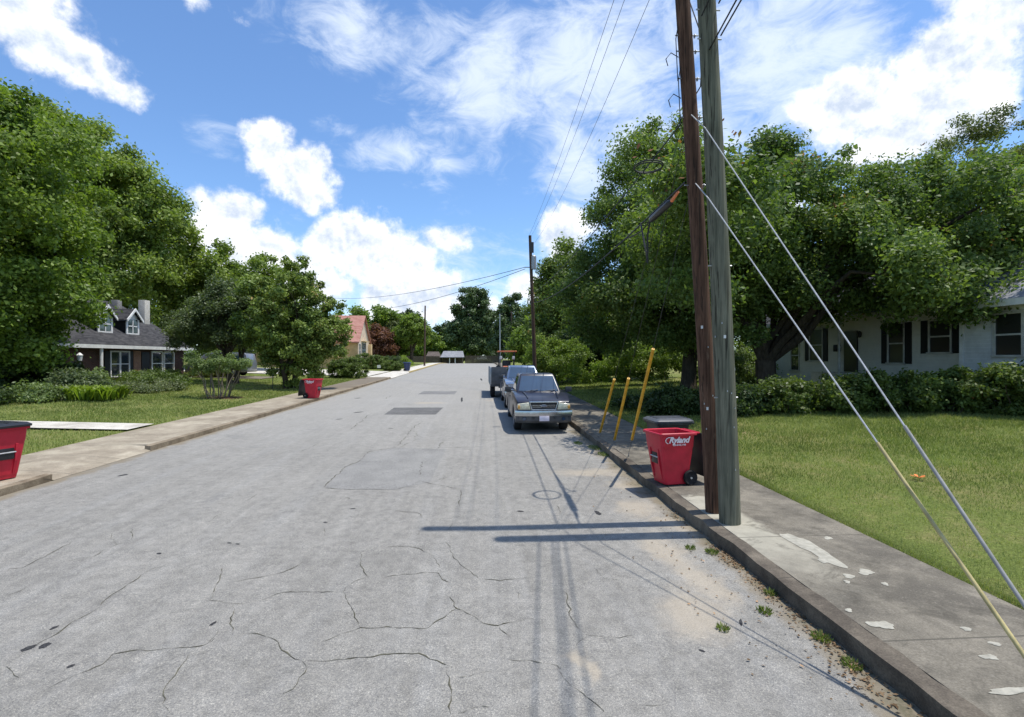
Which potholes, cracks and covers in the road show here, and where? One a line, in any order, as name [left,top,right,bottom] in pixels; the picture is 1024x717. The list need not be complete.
crack [49,526,530,713]
crack [21,566,165,654]
